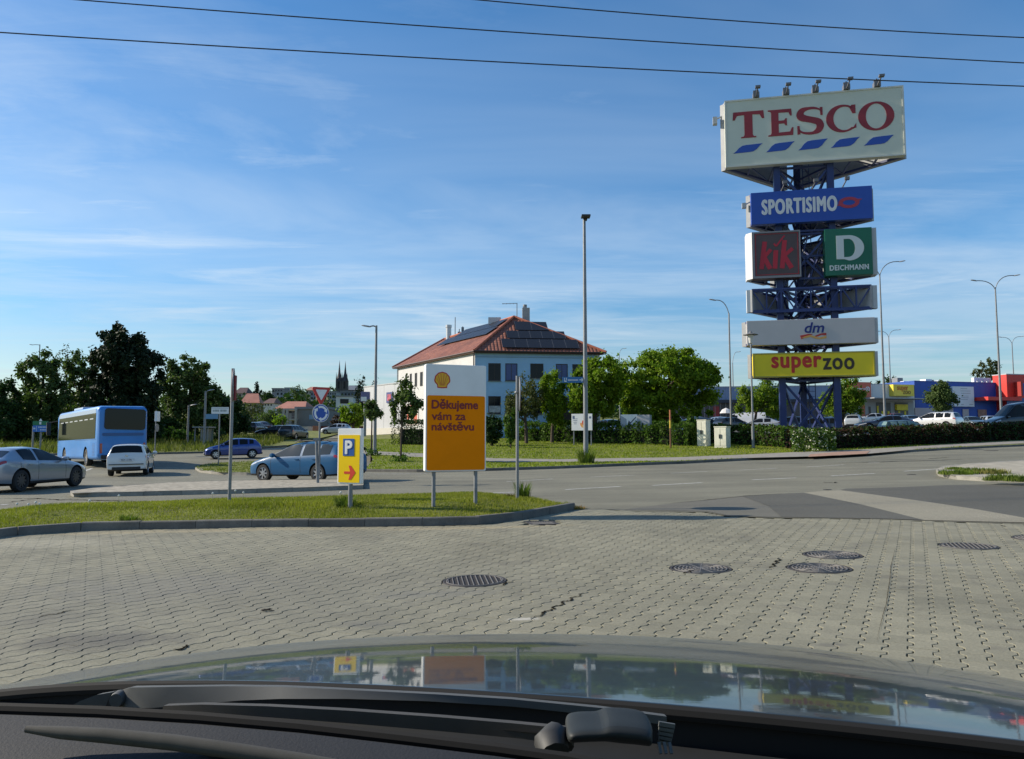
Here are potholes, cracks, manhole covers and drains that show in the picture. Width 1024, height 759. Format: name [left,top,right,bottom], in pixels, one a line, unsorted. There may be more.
manhole cover [670,563,732,574]
crack [531,592,584,619]
manhole cover [443,575,507,587]
manhole cover [803,550,863,560]
manhole cover [787,563,853,574]
